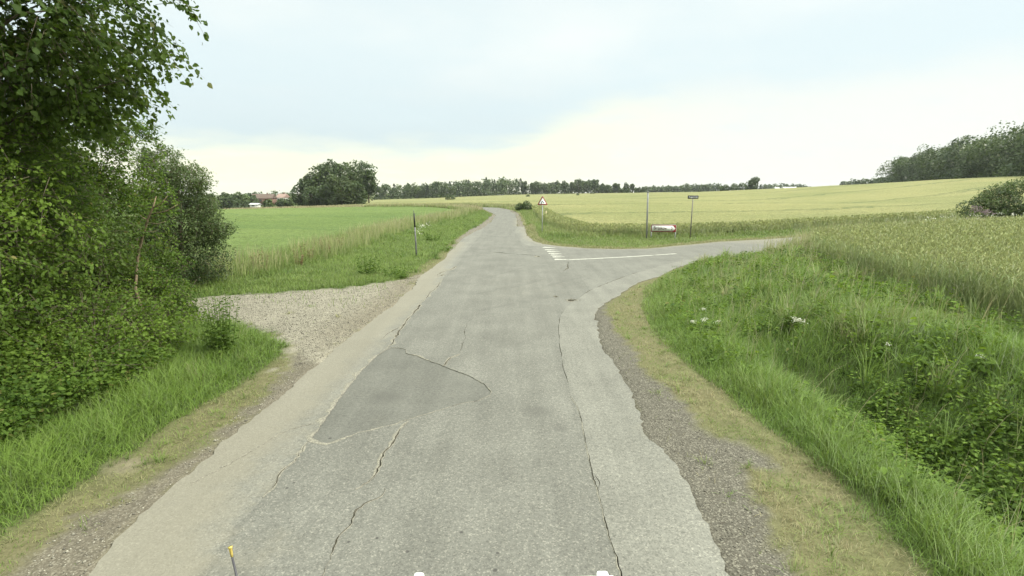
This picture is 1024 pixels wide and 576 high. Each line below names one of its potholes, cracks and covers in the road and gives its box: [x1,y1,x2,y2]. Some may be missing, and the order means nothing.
crack [191,424,311,483]
crack [550,305,622,576]
crack [322,421,409,576]
